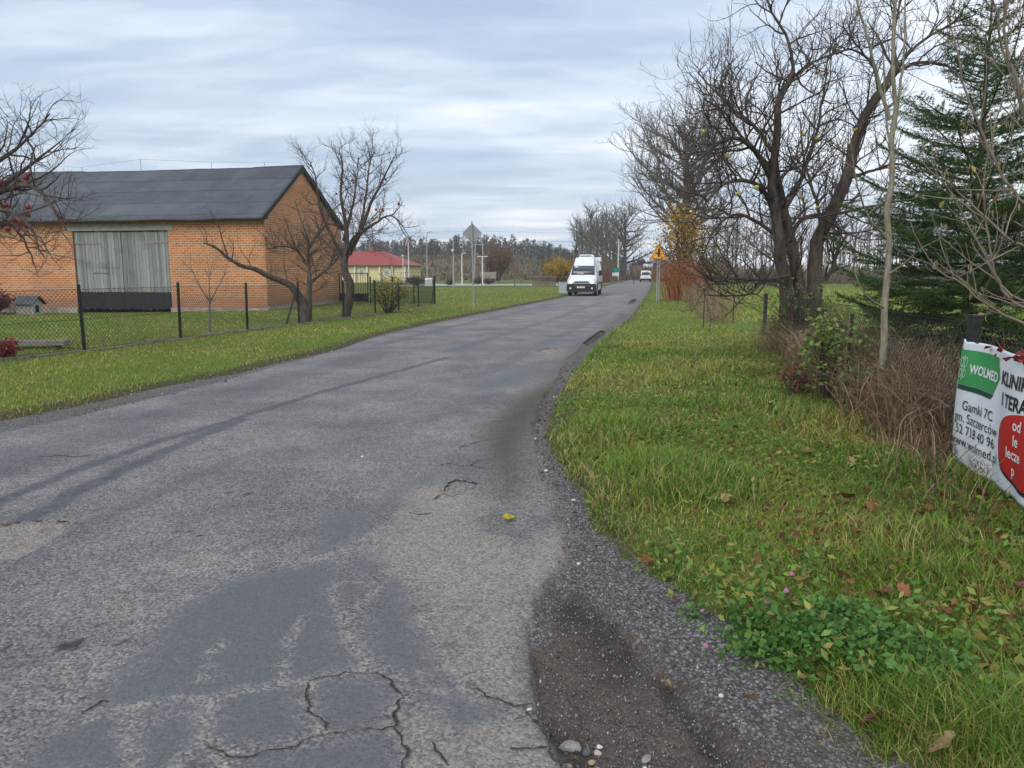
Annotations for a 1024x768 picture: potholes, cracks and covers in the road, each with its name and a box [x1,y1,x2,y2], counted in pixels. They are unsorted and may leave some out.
crack [476,687,564,768]
crack [409,441,491,515]
pothole [581,330,606,347]
crack [205,671,412,768]
